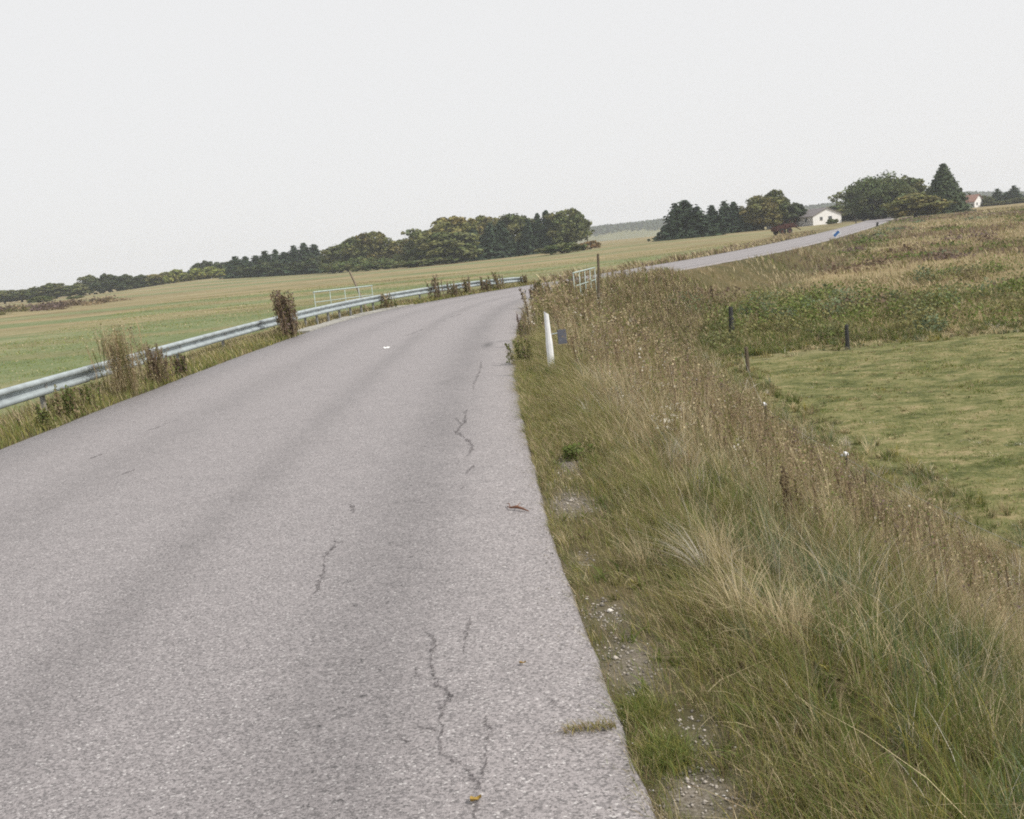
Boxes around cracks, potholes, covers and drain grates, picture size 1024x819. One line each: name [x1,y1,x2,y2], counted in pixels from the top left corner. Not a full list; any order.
crack [398,629,498,818]
